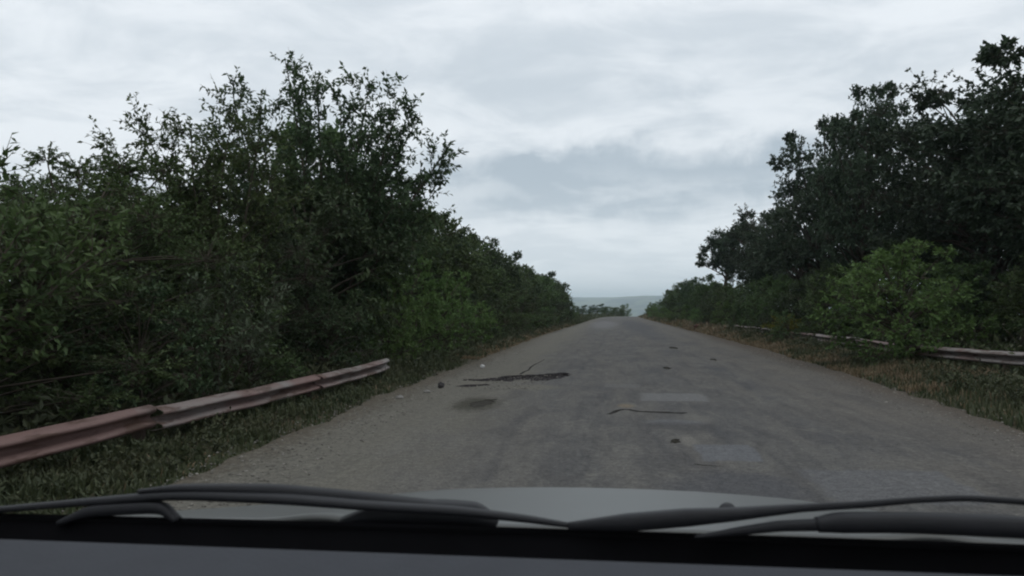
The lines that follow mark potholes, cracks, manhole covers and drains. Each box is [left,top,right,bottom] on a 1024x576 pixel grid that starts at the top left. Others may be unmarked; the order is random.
pothole [462,373,572,382]
